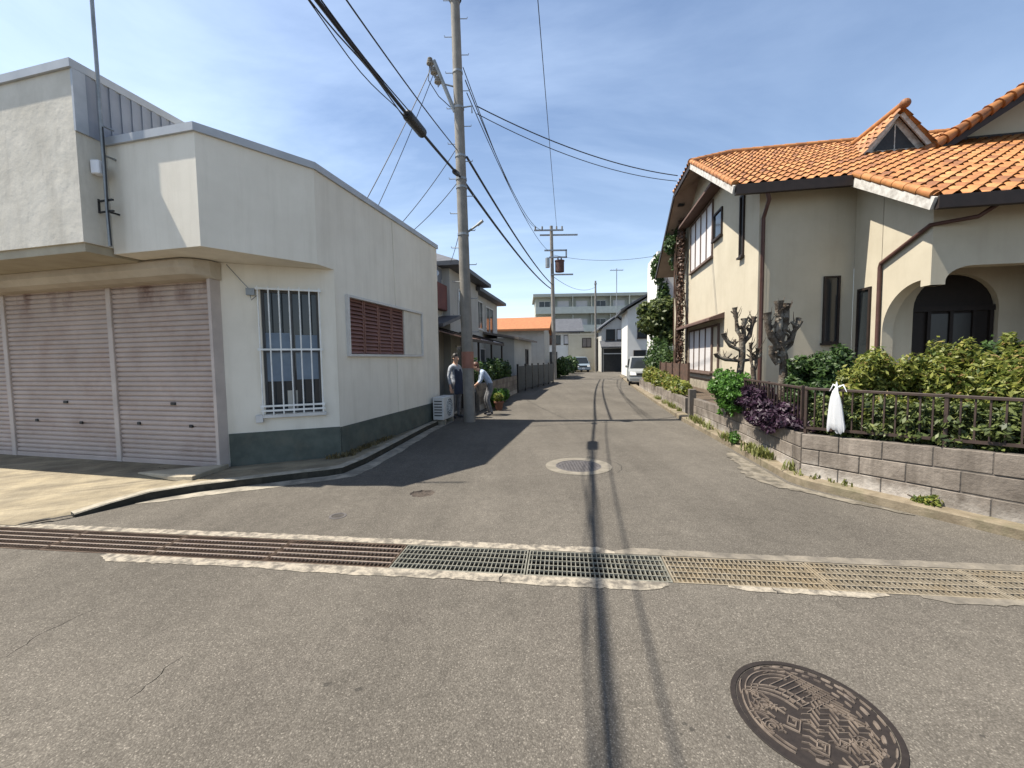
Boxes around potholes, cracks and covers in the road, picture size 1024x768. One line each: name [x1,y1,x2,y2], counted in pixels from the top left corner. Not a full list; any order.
drain grate [39,531,188,555]
drain grate [0,527,89,550]
drain grate [264,540,407,568]
drain grate [804,562,1013,600]
manhole cover [546,458,612,475]
drain grate [389,545,529,575]
drain grate [148,535,294,561]
drain grate [958,569,1024,601]
drain grate [661,556,836,591]
drain grate [526,550,673,583]
manhole cover [730,661,910,768]
